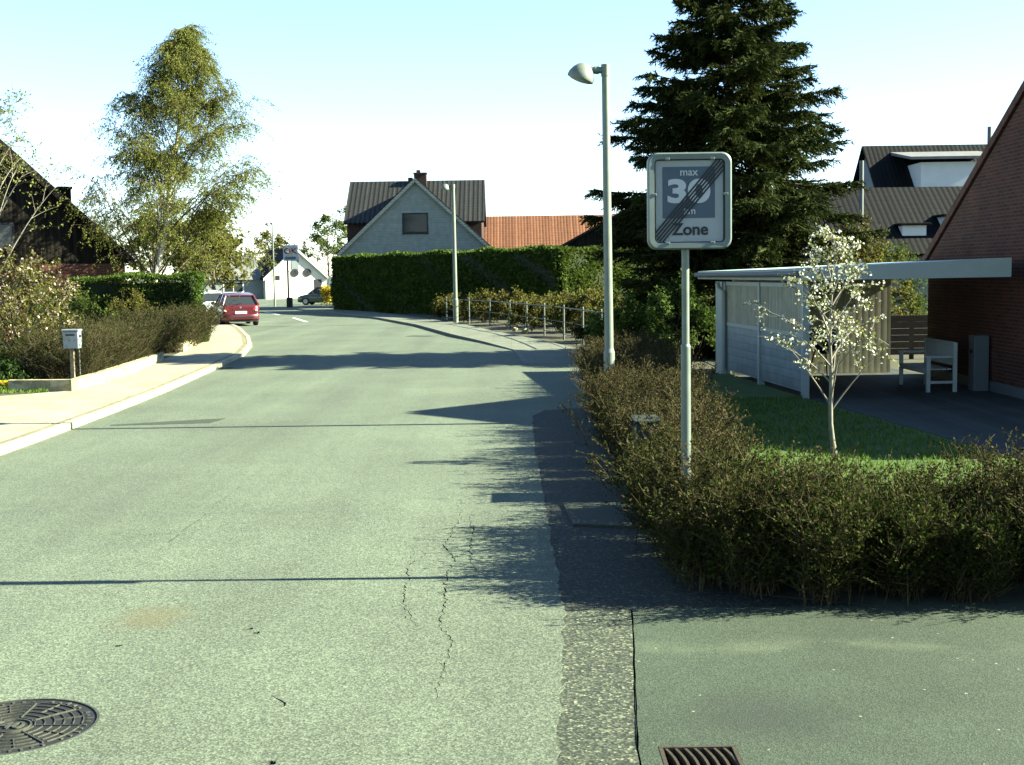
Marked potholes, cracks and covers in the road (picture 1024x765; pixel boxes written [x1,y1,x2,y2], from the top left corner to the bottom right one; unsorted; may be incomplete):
manhole cover [0,698,99,755]
crack [400,509,477,698]
drain grate [658,745,744,765]
